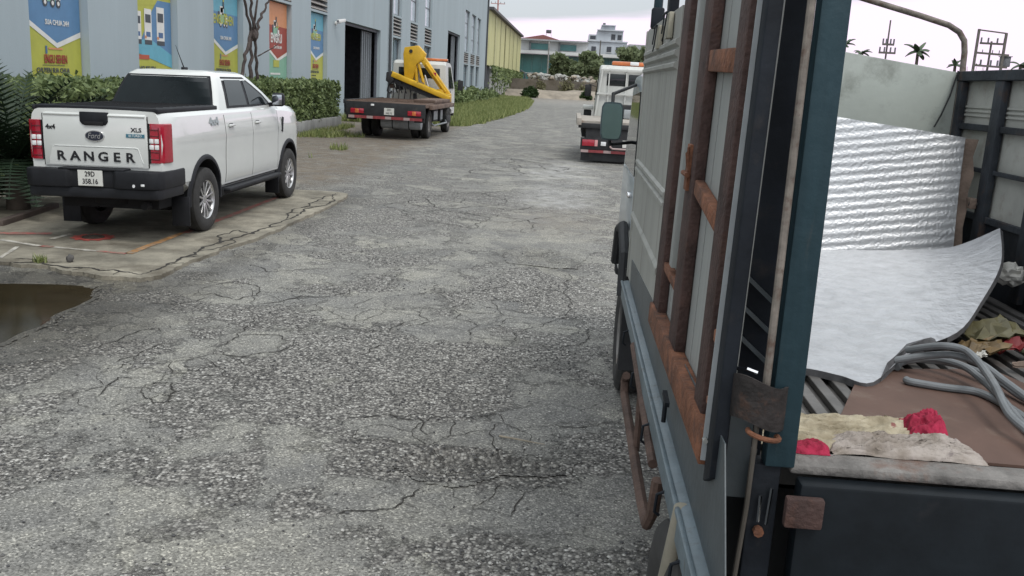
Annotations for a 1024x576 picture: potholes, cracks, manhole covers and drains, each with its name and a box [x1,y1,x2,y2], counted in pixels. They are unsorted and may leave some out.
pothole [0,280,102,346]
crack [384,191,548,233]
crack [14,193,337,275]
crack [352,413,582,516]
crack [469,158,570,177]
crack [69,264,590,409]
crack [334,488,420,514]
